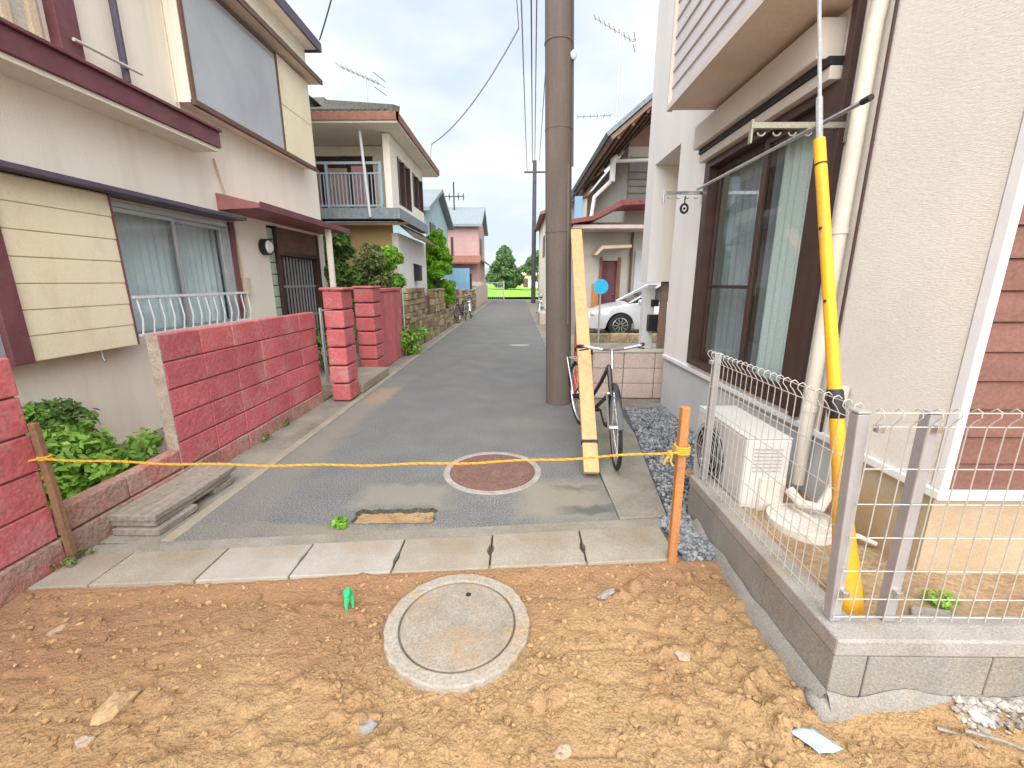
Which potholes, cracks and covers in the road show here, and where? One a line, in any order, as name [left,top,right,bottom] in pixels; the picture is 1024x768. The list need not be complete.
pothole [351,507,438,525]
manhole cover [383,574,530,694]
manhole cover [443,452,541,495]
